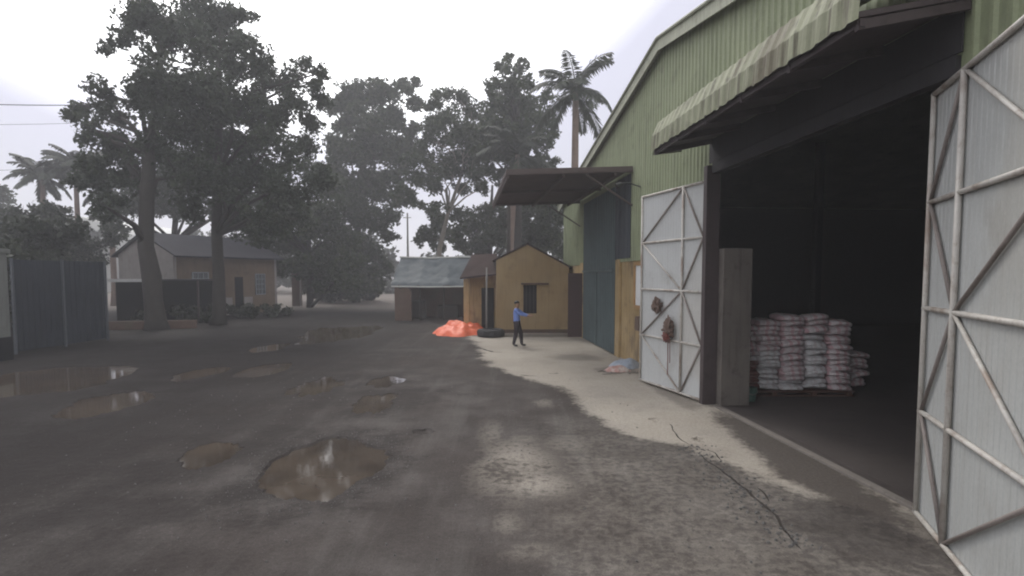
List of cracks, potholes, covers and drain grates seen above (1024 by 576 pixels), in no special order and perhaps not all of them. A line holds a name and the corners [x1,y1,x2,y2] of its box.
pothole [246,342,292,353]
pothole [365,375,408,388]
pothole [177,441,245,470]
pothole [292,325,385,345]
pothole [169,366,233,382]
pothole [231,362,293,378]
pothole [283,375,346,397]
pothole [254,436,393,502]
pothole [51,390,158,420]
pothole [0,364,143,398]
crack [670,424,802,550]
pothole [350,393,399,414]
